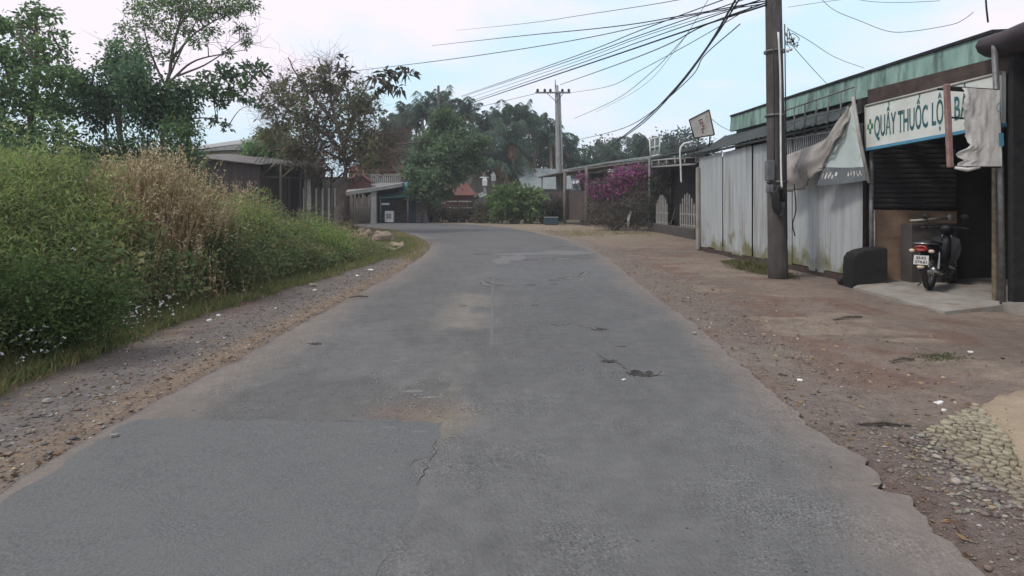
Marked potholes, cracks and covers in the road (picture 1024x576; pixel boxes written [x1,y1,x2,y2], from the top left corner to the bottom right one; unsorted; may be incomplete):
crack [480,277,502,286]
pothole [613,368,671,378]
crack [528,246,588,285]
crack [417,442,437,484]
